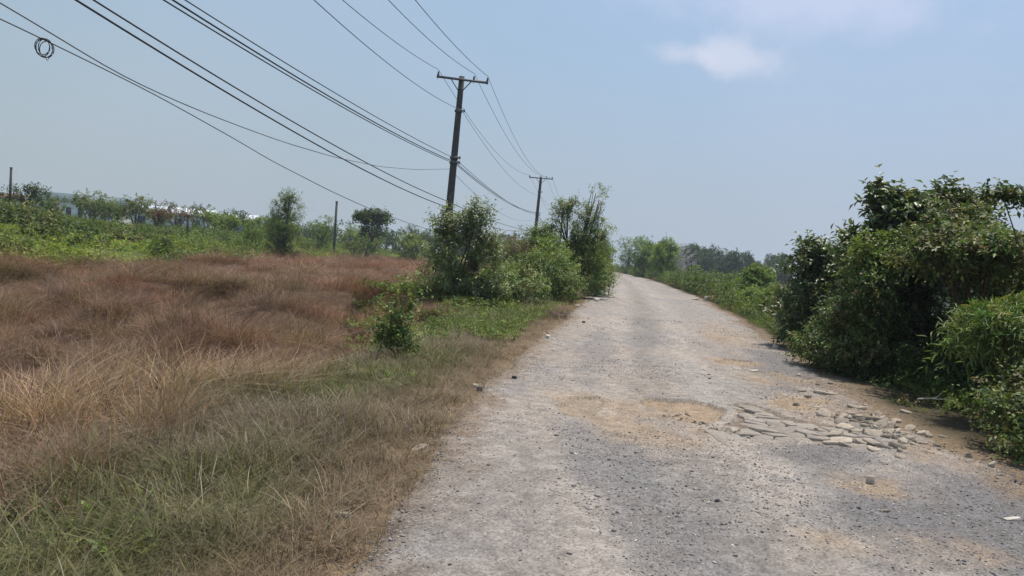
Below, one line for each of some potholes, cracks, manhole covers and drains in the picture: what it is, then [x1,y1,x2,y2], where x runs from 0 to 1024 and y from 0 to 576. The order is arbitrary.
pothole [631,396,739,426]
pothole [549,394,611,419]
